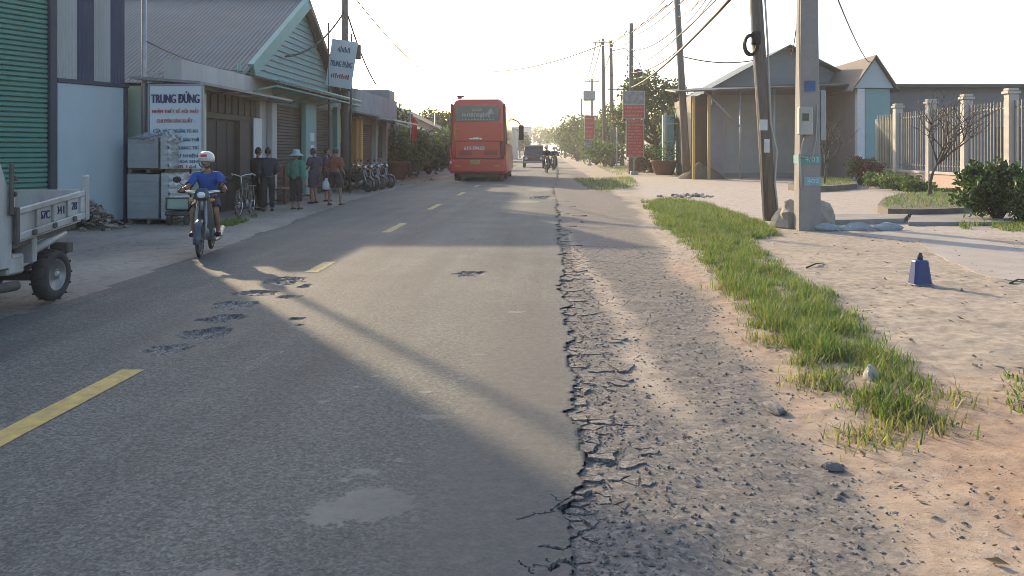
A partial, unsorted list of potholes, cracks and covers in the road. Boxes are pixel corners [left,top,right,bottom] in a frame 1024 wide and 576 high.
pothole [139,343,198,358]
crack [517,201,660,576]
pothole [176,326,233,341]
pothole [191,313,250,324]
pothole [262,276,307,285]
pothole [205,300,261,310]
